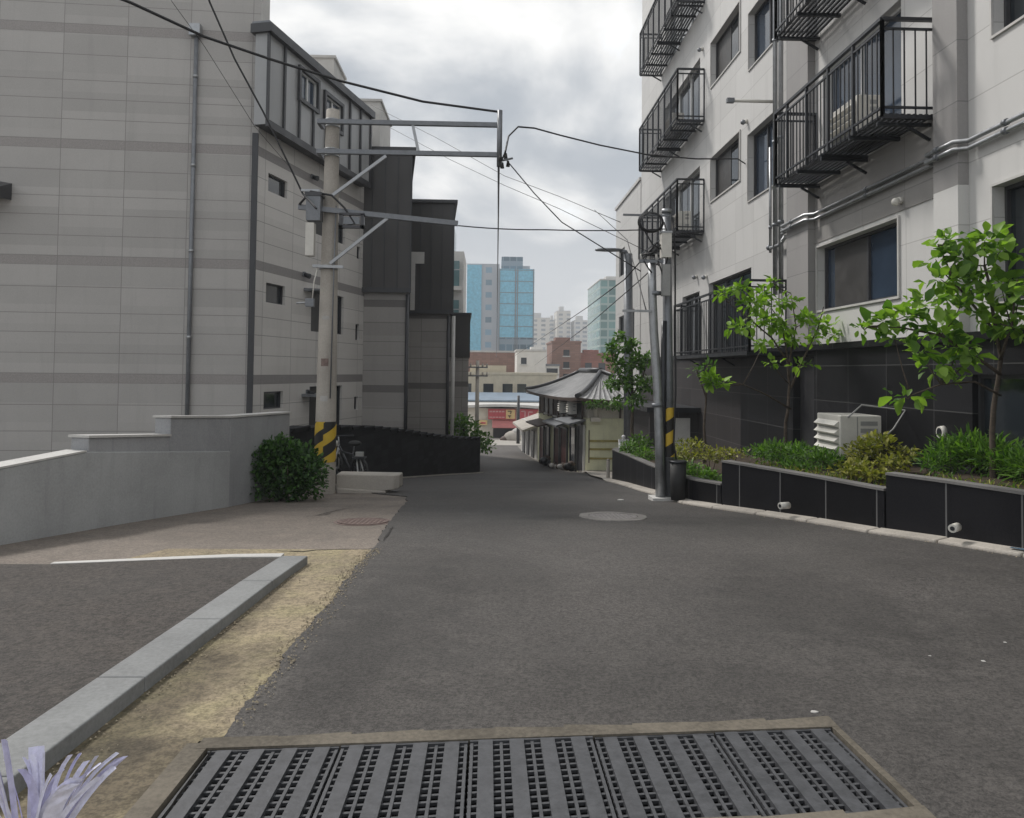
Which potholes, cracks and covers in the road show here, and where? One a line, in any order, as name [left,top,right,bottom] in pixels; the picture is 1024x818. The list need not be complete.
manhole cover [333,517,391,526]
manhole cover [579,512,647,522]
